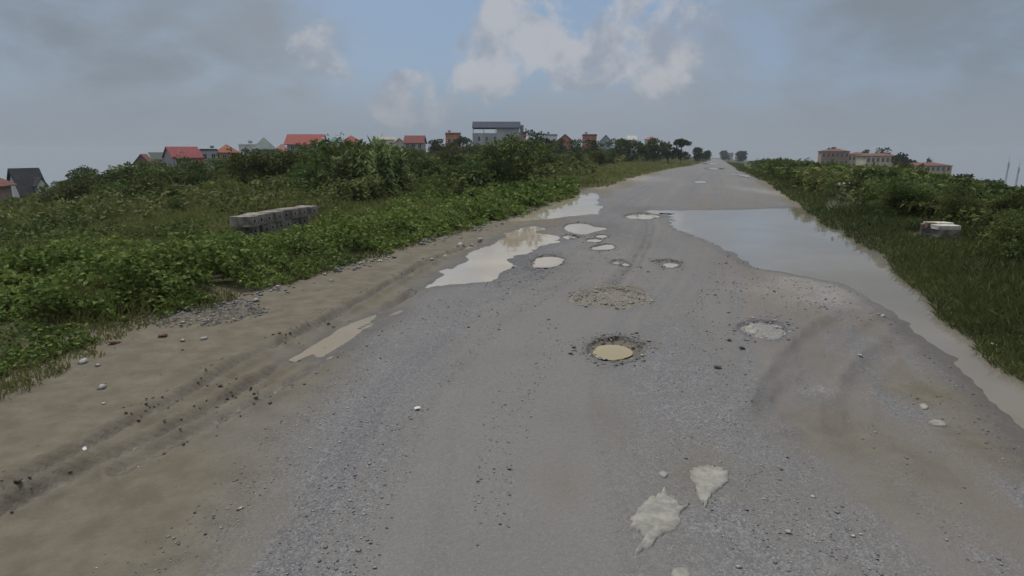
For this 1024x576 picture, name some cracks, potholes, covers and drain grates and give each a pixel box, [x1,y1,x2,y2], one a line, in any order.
pothole [621,212,666,220]
pothole [569,331,658,368]
pothole [728,316,795,342]
pothole [525,252,567,271]
pothole [555,221,612,237]
pothole [649,258,684,270]
pothole [568,285,654,310]
pothole [589,243,617,252]
